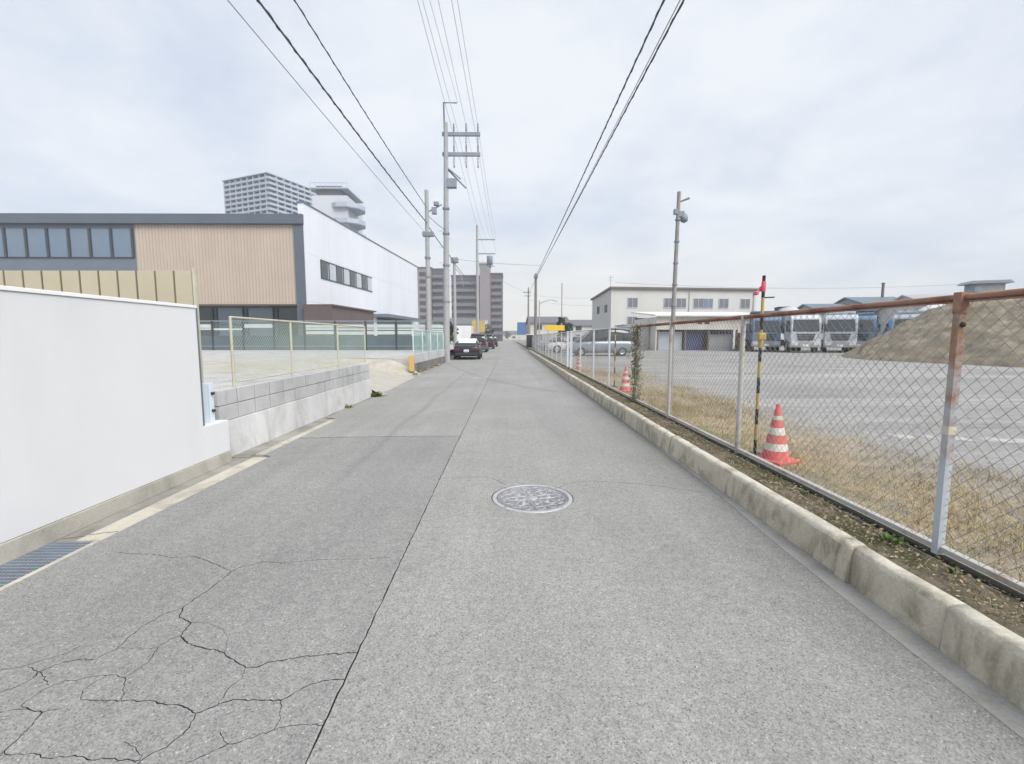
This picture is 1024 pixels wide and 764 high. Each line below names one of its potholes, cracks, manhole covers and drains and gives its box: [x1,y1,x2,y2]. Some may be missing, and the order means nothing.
manhole cover [492,484,573,513]
crack [0,552,389,764]
drain grate [0,542,92,587]
